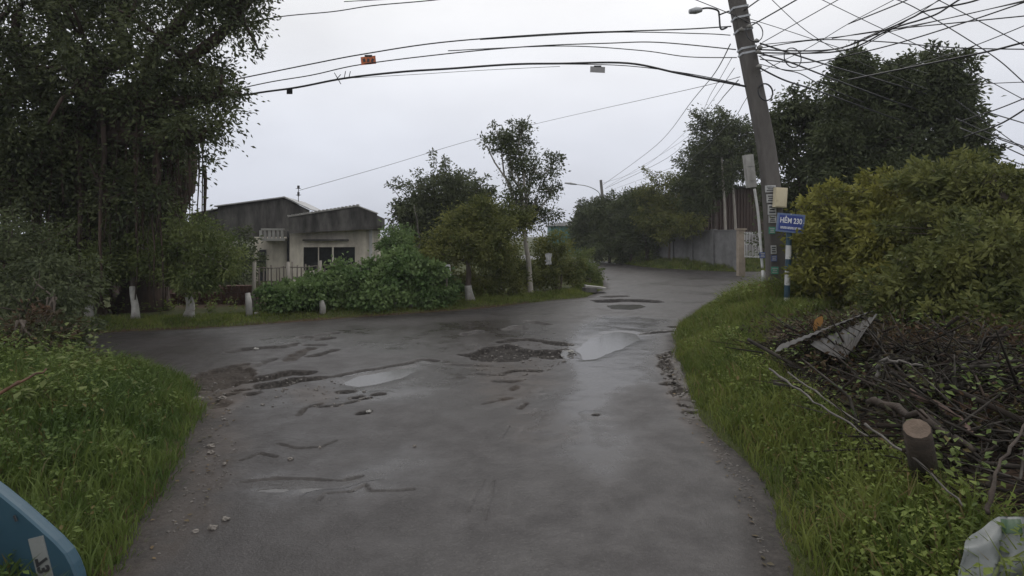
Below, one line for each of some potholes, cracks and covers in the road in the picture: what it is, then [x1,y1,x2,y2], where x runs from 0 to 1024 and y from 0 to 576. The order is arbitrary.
pothole [664,401,696,410]
pothole [245,372,336,390]
pothole [186,364,264,394]
crack [213,320,581,533]
pothole [645,350,694,399]
pothole [448,343,582,366]
